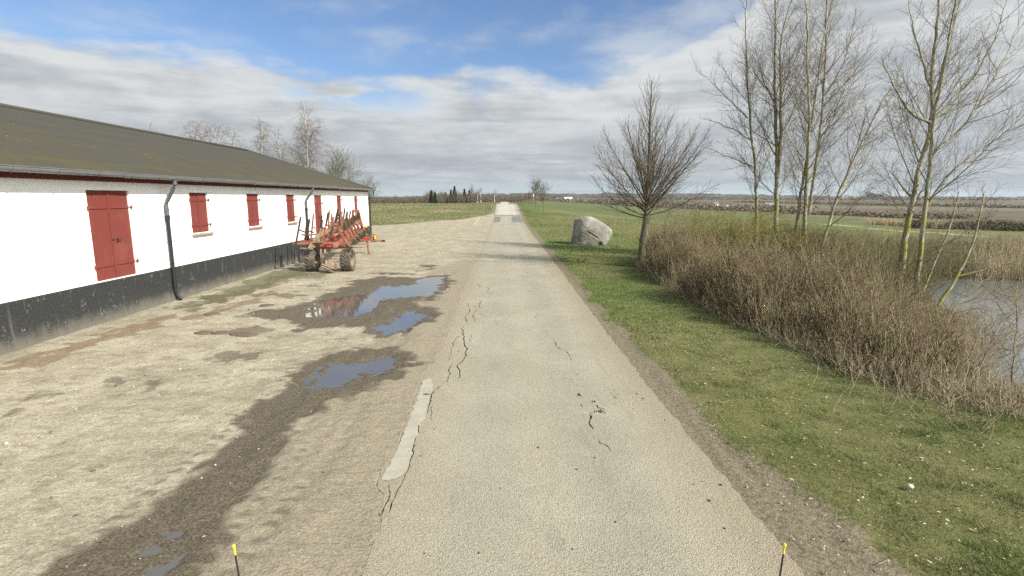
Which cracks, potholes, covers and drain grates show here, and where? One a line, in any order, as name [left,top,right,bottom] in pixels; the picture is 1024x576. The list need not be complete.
crack [381,284,489,515]
